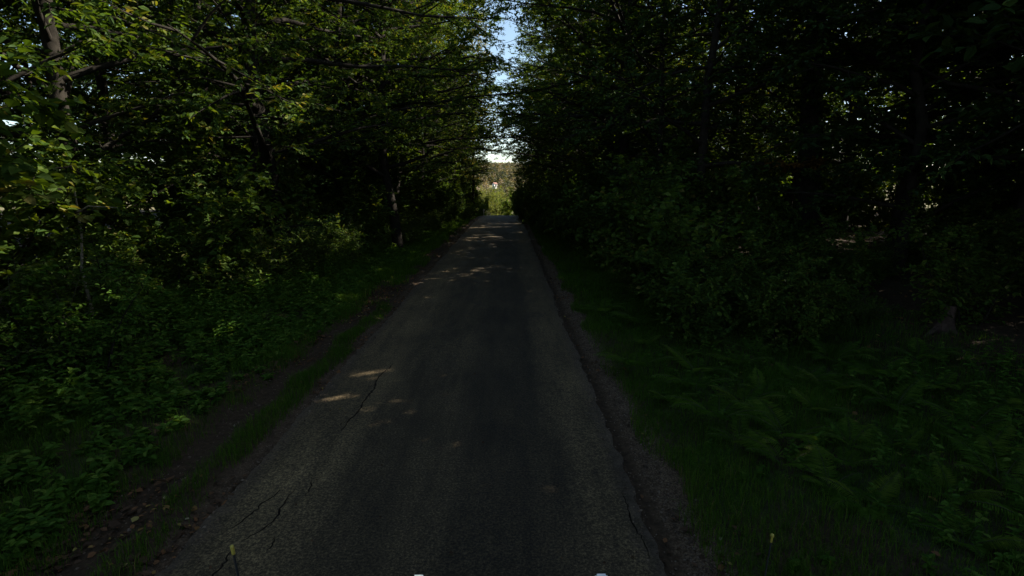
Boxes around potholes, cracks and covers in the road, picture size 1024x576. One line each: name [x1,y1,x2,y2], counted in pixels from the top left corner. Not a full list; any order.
crack [622,494,650,558]
crack [339,366,391,431]
crack [212,481,312,576]
